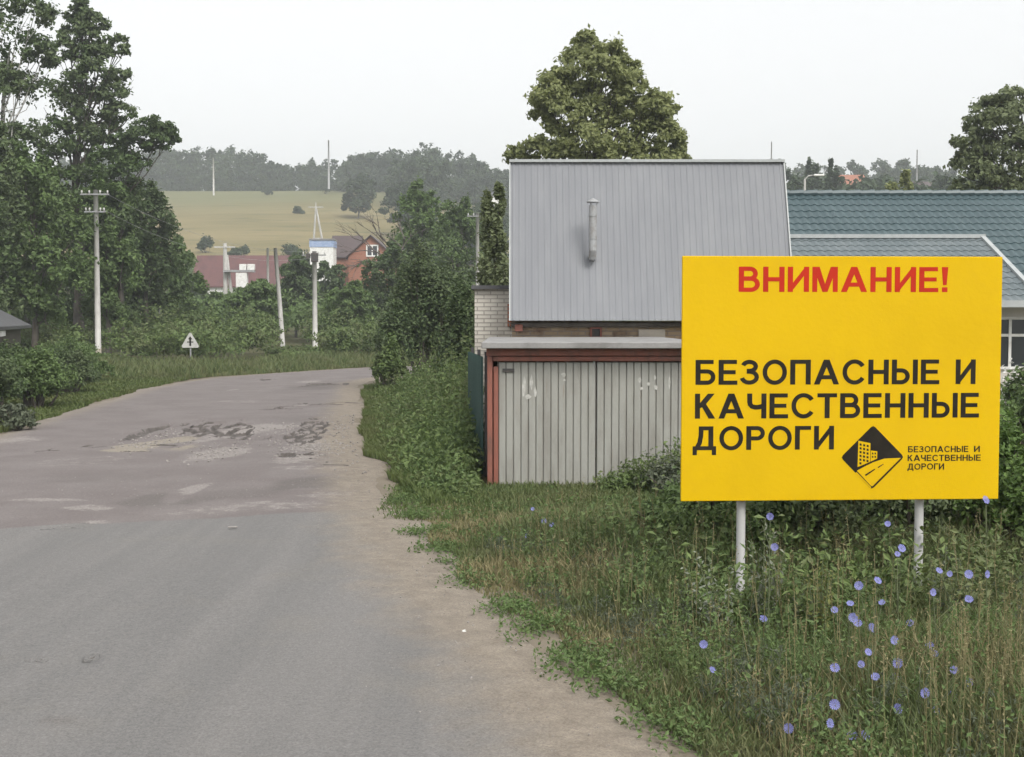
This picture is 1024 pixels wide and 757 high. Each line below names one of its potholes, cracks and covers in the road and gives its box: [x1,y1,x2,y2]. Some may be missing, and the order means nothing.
pothole [118,425,176,441]
